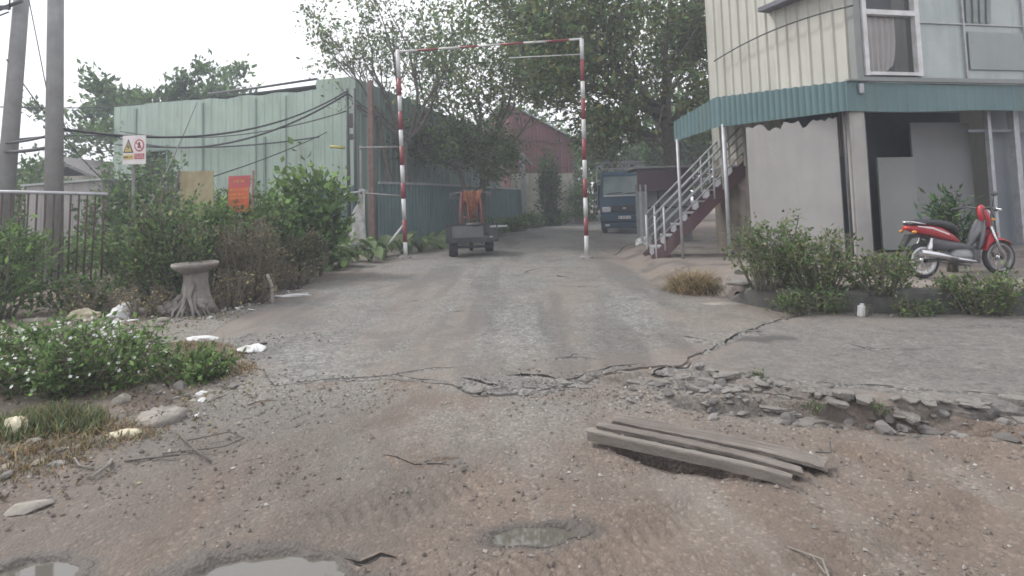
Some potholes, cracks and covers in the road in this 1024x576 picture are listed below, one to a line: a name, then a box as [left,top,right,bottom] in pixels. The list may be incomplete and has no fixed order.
pothole [482,519,595,548]
crack [847,344,894,352]
crack [247,319,788,406]
pothole [0,552,95,576]
pothole [658,394,1024,442]
crack [383,455,459,470]
pothole [167,544,364,576]
